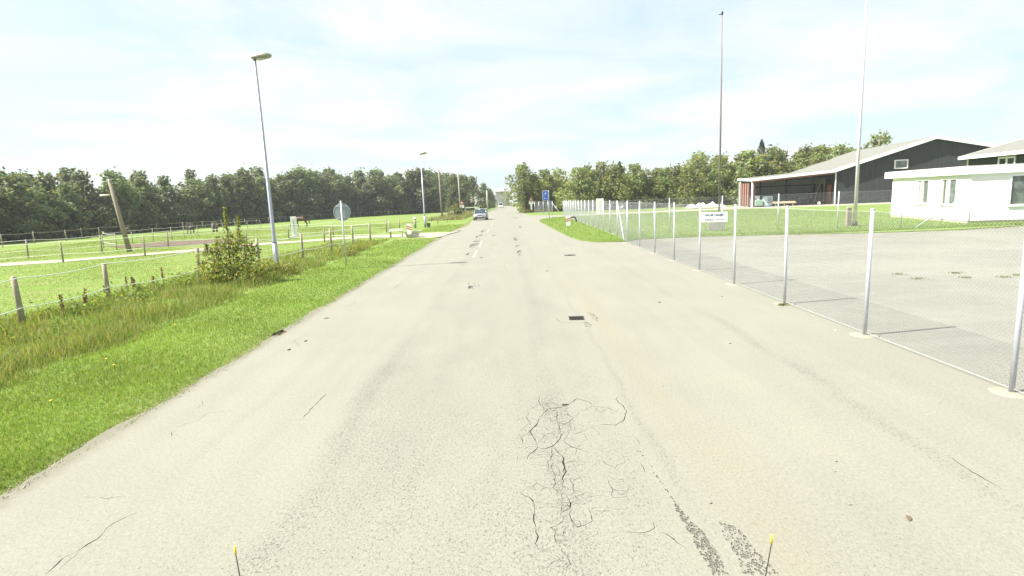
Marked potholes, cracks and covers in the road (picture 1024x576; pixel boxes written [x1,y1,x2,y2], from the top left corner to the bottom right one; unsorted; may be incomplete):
pothole [719,522,778,575]
crack [513,395,631,575]
crack [46,513,136,574]
pothole [637,450,729,576]
